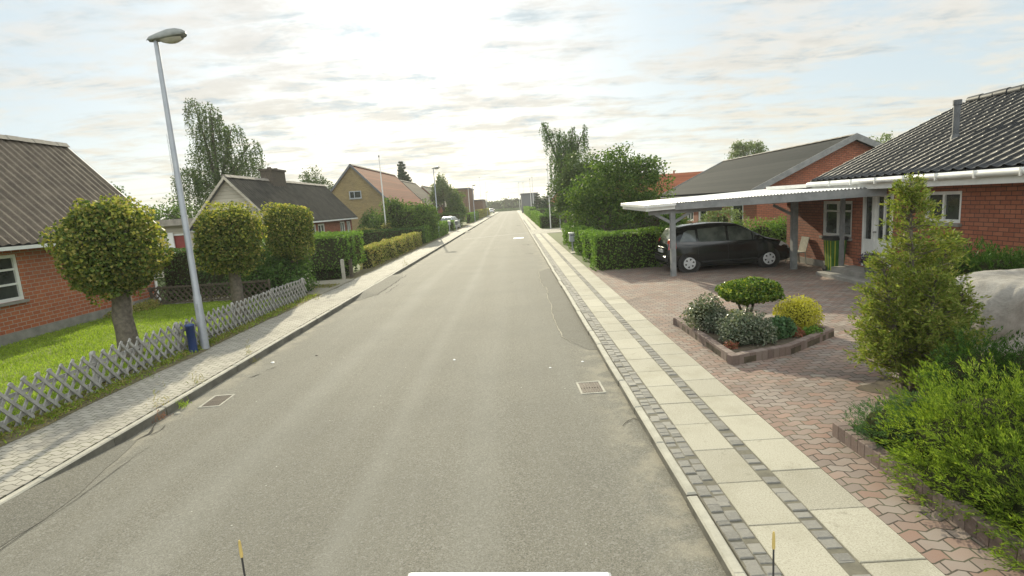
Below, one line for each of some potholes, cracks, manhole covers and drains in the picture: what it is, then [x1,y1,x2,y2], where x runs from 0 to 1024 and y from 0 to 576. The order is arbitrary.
drain grate [576,381,606,394]
drain grate [198,394,235,408]
